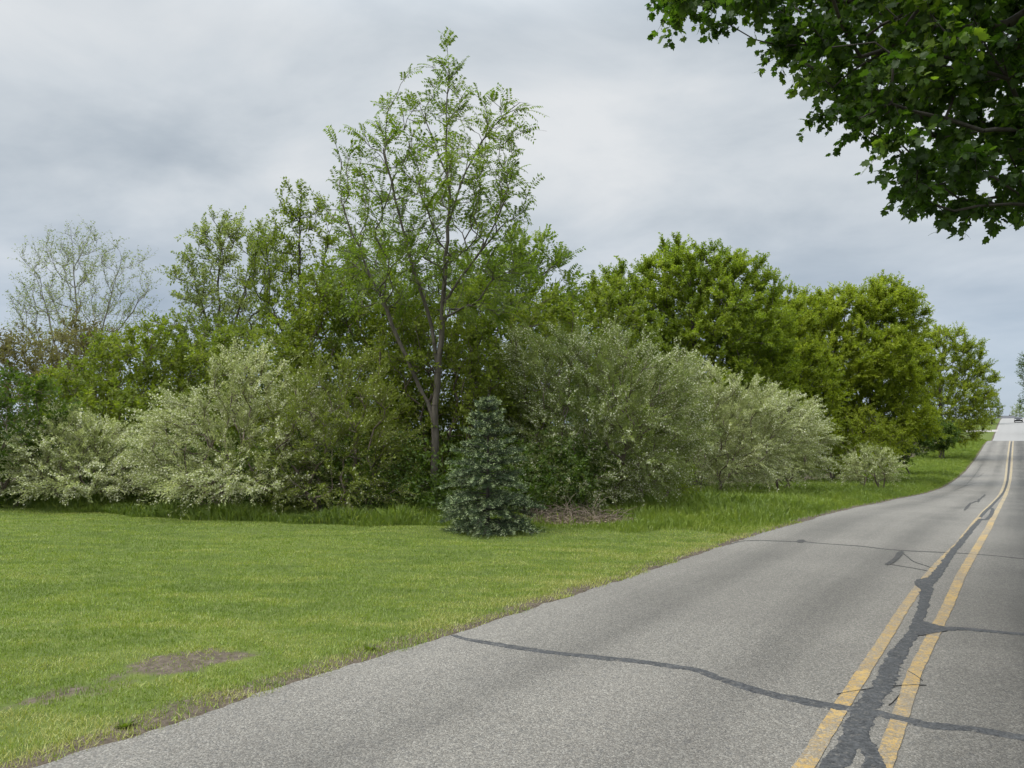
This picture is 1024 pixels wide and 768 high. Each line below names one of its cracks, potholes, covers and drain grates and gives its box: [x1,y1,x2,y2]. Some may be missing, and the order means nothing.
crack [956,468,985,510]
crack [837,671,926,705]
